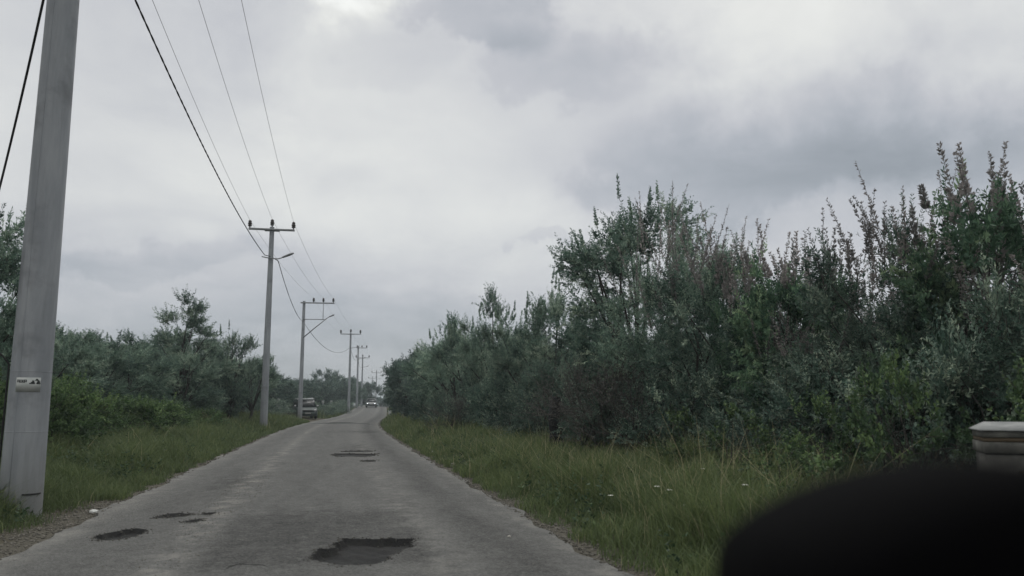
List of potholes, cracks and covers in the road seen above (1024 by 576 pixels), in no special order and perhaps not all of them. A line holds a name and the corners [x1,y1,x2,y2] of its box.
pothole [86,527,153,541]
pothole [303,536,419,568]
